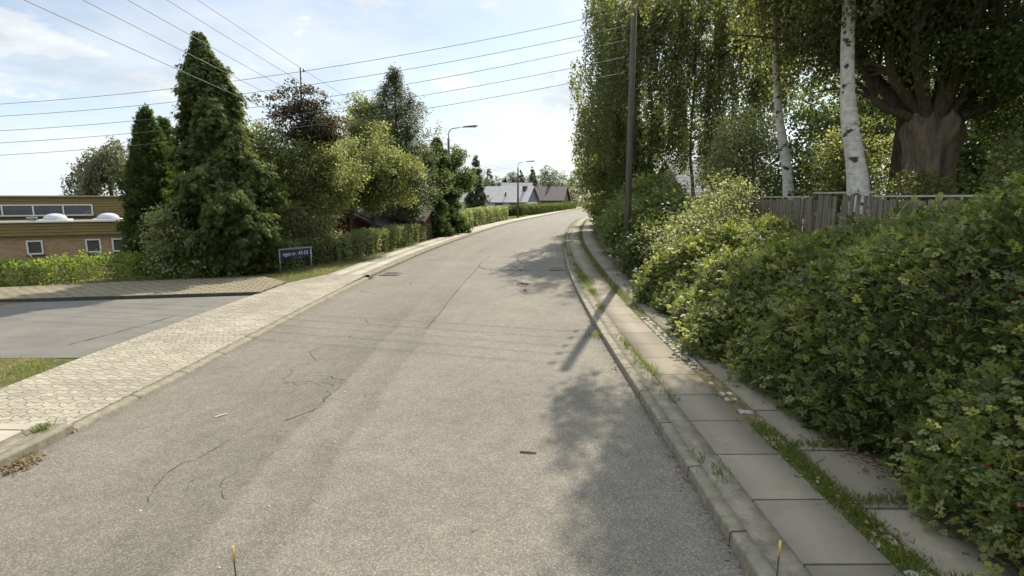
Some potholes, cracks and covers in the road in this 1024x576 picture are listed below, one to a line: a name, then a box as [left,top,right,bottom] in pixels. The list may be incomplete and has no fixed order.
crack [282,351,344,421]
